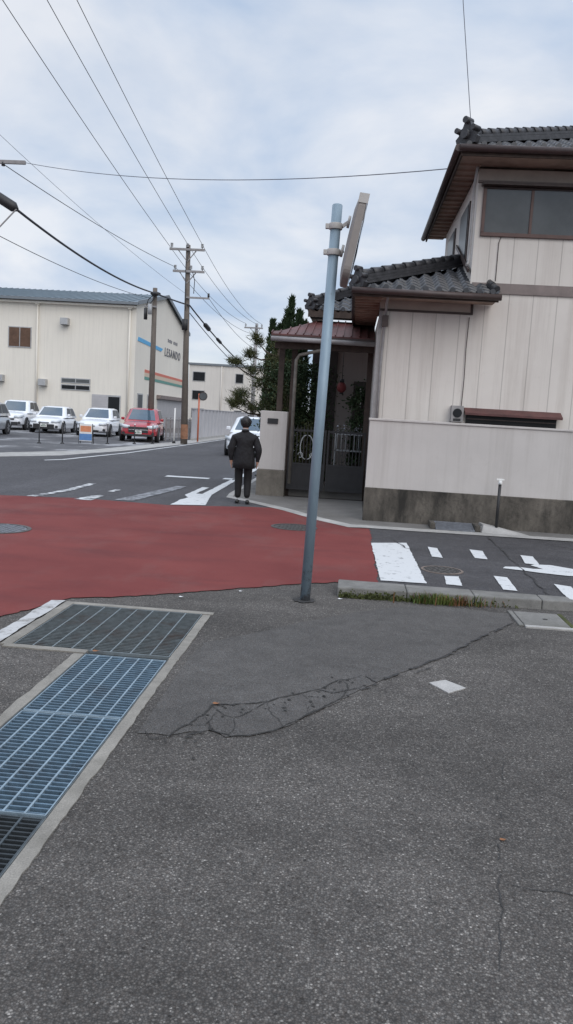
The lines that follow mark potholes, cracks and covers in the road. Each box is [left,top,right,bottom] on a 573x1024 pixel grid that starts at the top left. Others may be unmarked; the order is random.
manhole cover [421,566,463,575]
drain grate [0,710,121,818]
drain grate [23,654,166,719]
drain grate [0,814,44,875]
manhole cover [0,523,32,534]
manhole cover [271,523,317,531]
crack [145,623,512,759]
utility cover [507,610,573,632]
drain grate [13,604,202,660]
crack [488,536,551,596]
